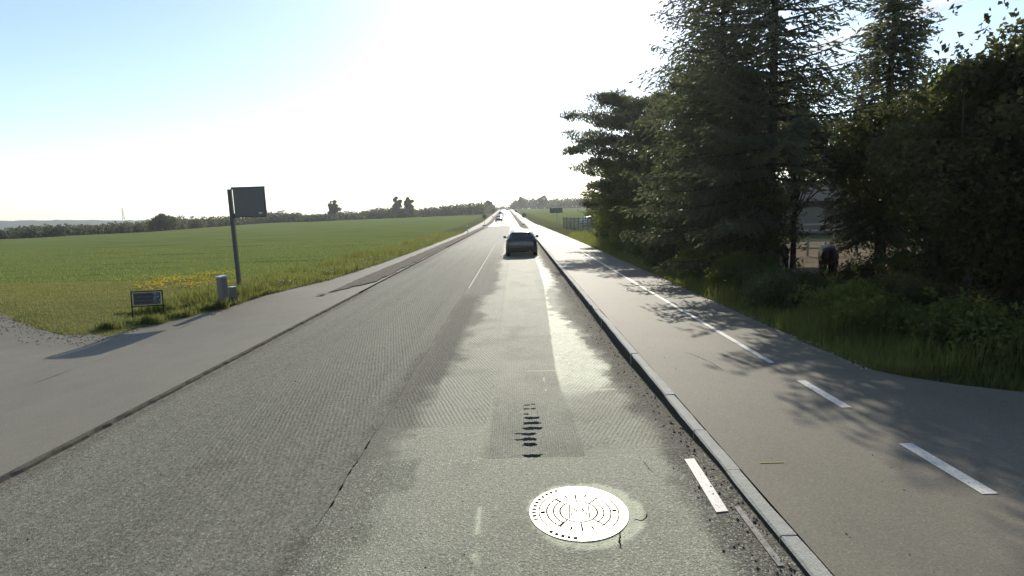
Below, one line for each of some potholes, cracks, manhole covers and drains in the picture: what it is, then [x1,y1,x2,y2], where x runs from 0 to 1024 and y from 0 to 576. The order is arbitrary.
manhole cover [530,486,629,542]
